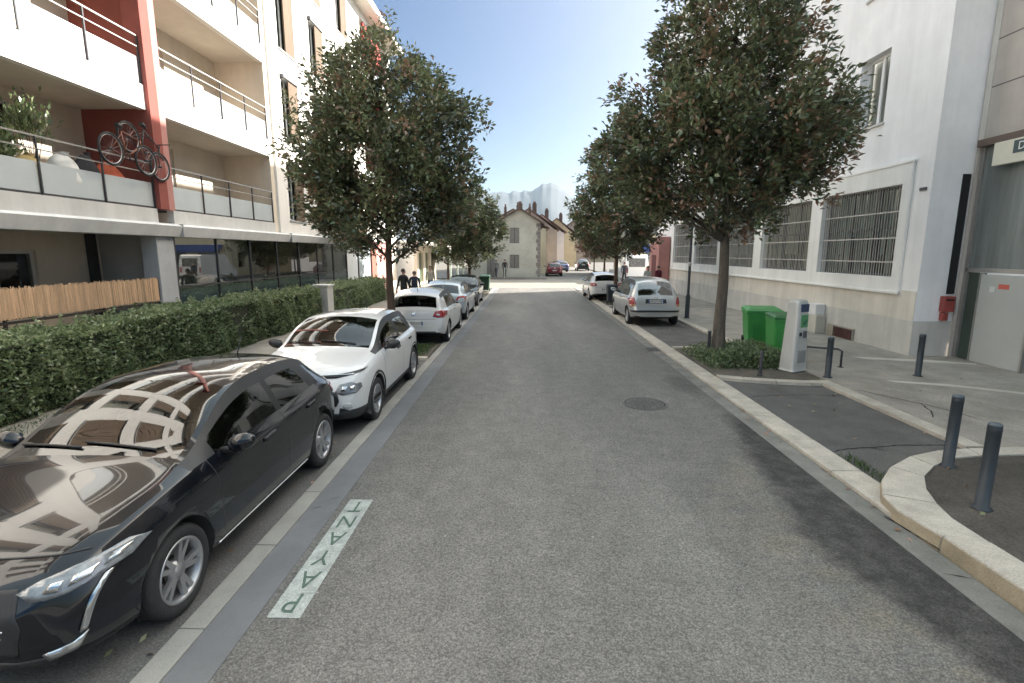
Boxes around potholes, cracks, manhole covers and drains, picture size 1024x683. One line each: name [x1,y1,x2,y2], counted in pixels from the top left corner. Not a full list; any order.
crack [861,390,977,419]
manhole cover [622,397,668,410]
crack [834,444,944,452]
